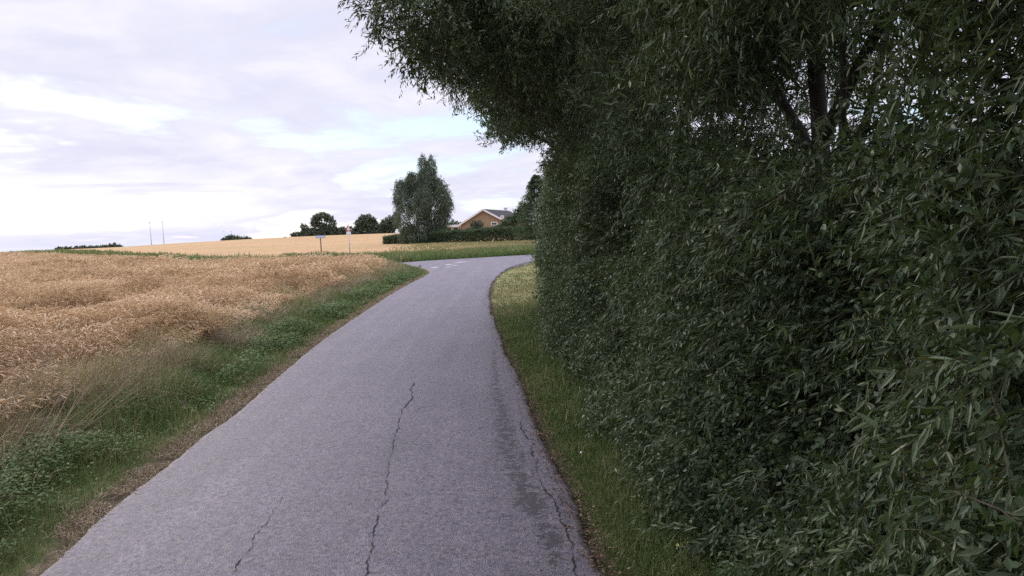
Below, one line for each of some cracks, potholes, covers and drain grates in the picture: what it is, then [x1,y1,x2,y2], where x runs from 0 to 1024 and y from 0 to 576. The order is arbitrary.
crack [365,383,419,575]
crack [520,421,577,576]
